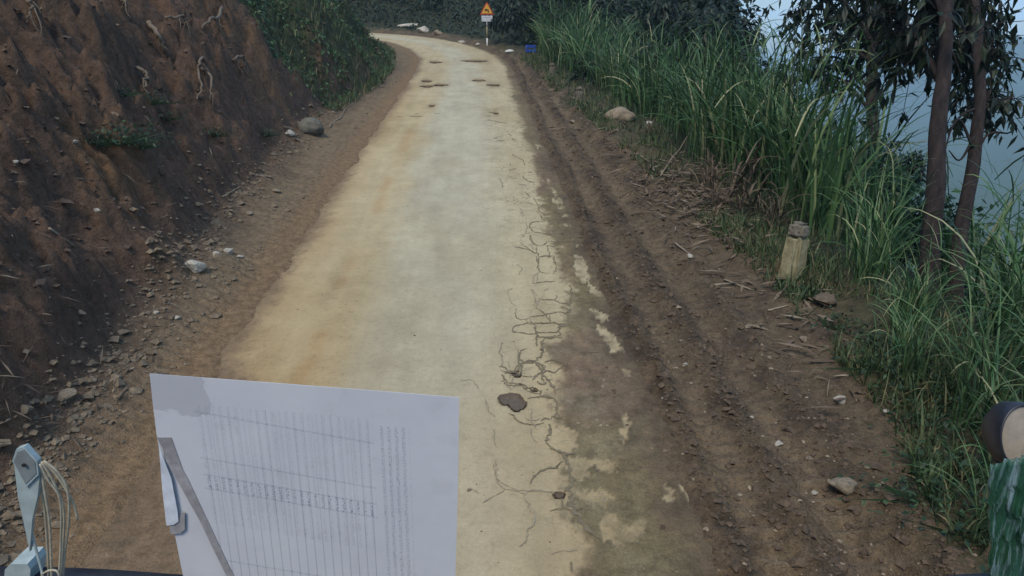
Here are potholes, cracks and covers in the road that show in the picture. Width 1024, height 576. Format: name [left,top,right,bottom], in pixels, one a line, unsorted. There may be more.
crack [467,84,600,572]
pothole [498,392,527,412]
